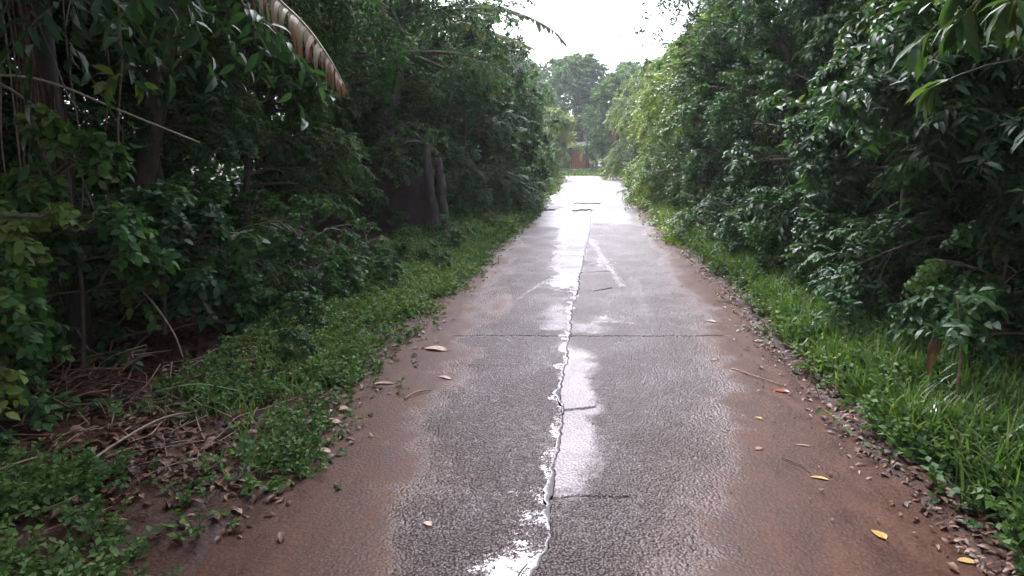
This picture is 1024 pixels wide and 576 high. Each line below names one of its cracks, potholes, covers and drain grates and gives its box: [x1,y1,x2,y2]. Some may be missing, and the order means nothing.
crack [527,182,609,576]
